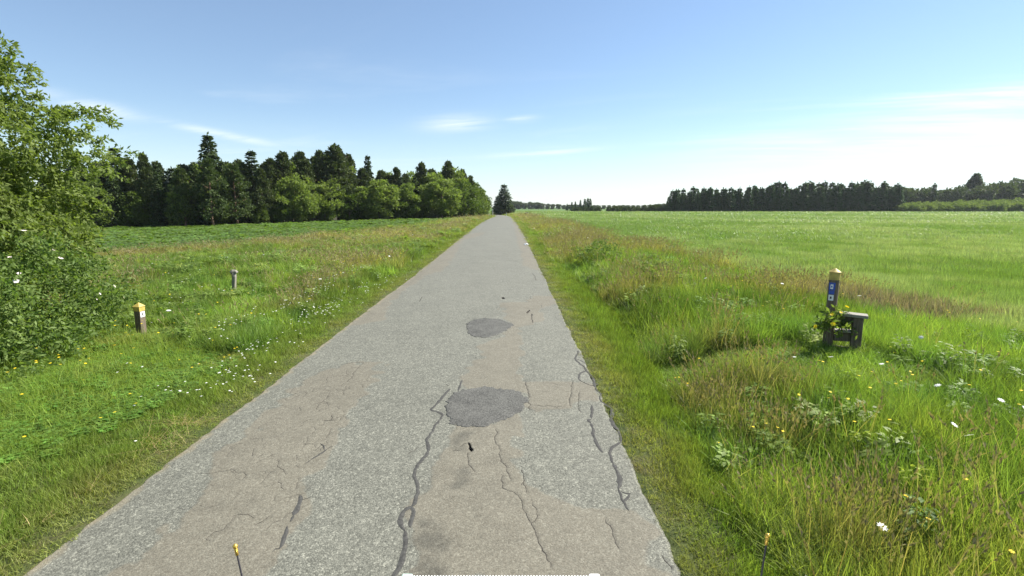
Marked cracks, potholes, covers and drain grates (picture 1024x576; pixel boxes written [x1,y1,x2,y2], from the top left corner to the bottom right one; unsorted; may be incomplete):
crack [494,429,551,563]
crack [180,362,364,541]
